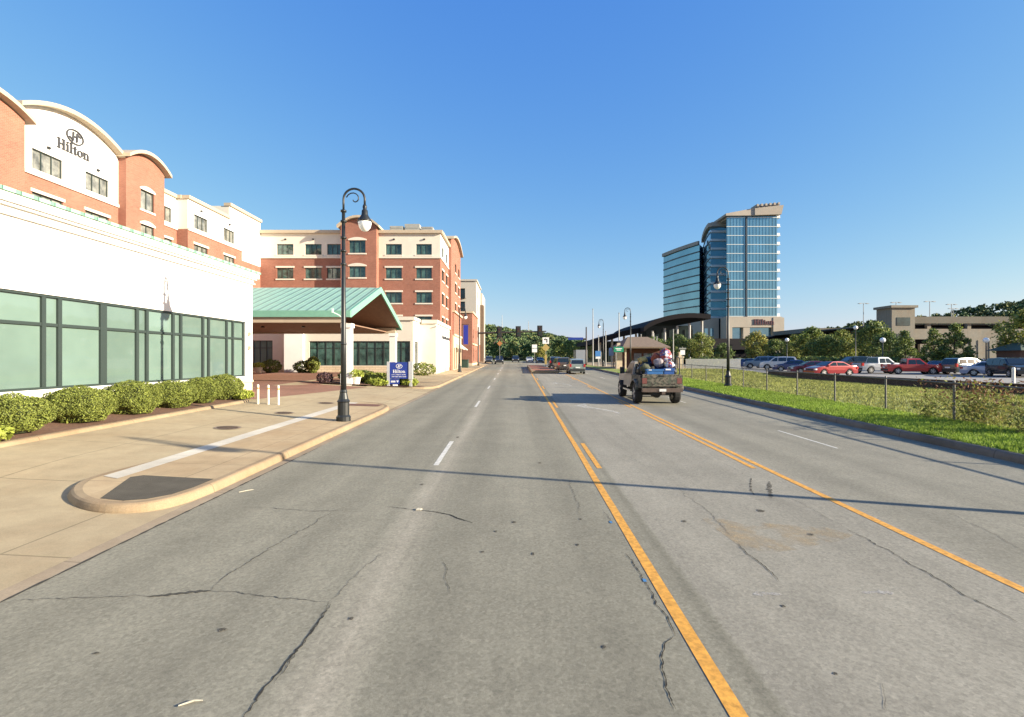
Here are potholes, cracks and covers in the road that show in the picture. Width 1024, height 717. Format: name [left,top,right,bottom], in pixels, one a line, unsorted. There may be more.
crack [627,555,676,709]
crack [788,497,1017,622]
crack [21,507,384,717]
crack [680,489,775,576]
